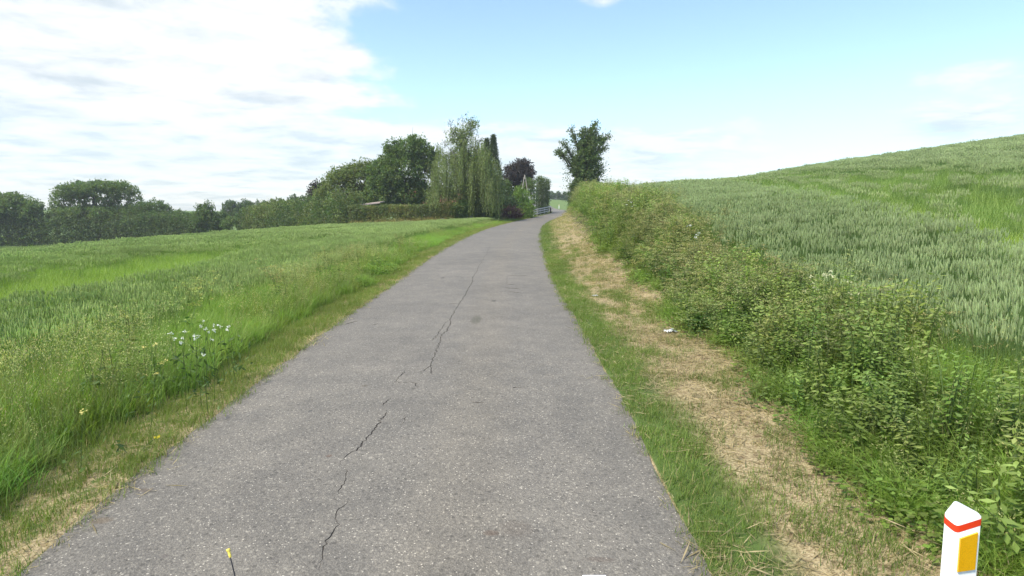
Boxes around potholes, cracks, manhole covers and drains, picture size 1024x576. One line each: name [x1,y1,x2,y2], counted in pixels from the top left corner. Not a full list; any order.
crack [319,259,484,566]
